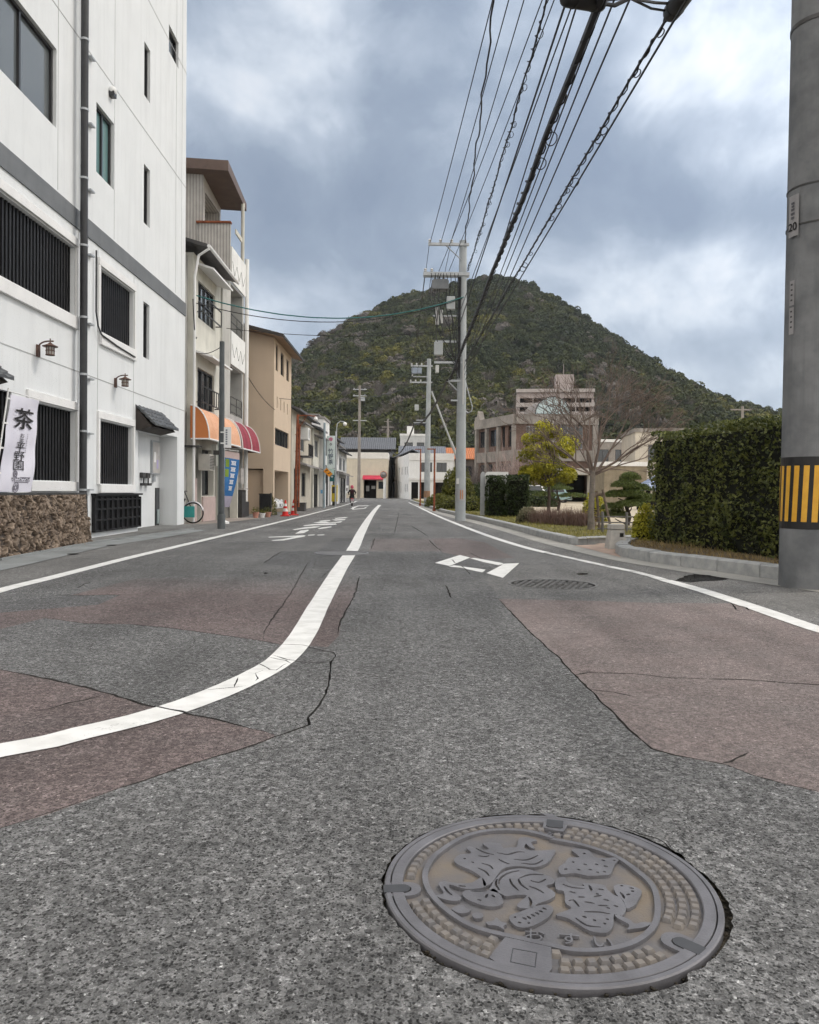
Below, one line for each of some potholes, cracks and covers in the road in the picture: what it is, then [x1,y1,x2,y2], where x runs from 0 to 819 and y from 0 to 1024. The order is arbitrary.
crack [497,598,819,791]
crack [1,563,359,828]
manhole cover [381,813,734,998]
pothole [674,574,727,583]
